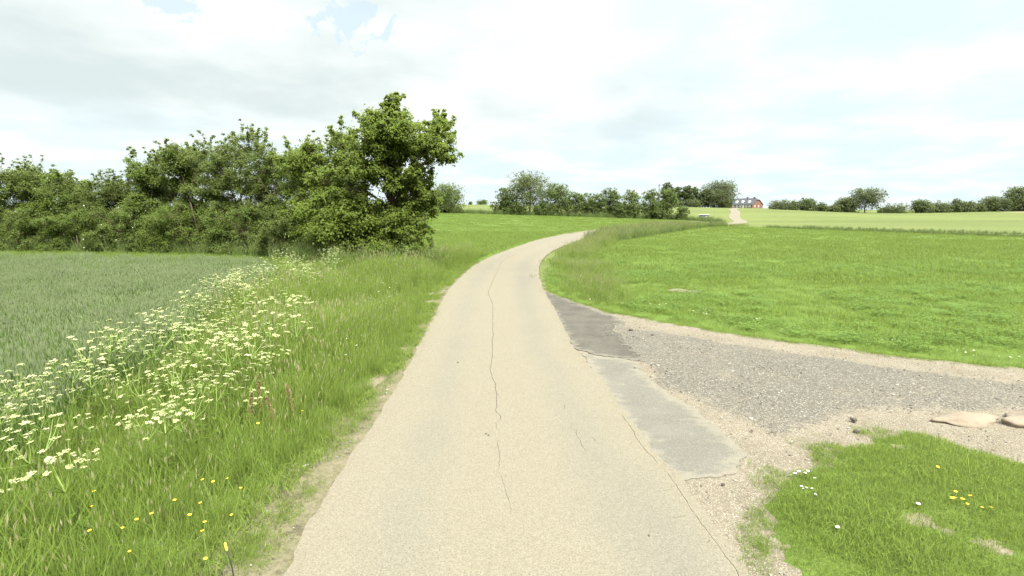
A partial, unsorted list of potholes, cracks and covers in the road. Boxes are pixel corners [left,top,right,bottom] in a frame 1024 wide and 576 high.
crack [488,248,530,508]
